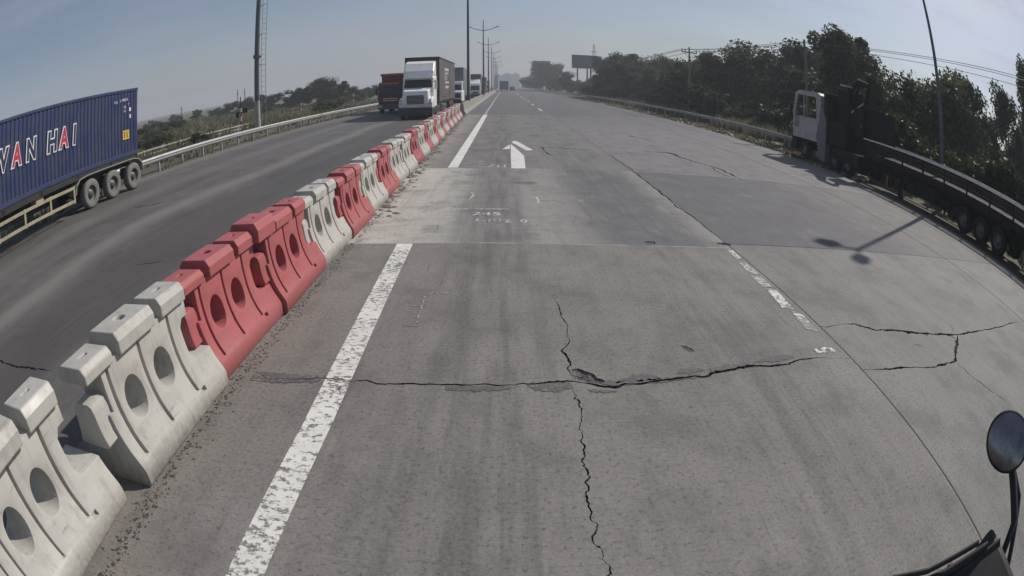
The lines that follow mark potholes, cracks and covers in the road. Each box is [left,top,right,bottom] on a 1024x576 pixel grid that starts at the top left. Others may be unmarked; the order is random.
crack [608,136,741,241]
crack [0,360,52,371]
crack [820,322,1017,400]
crack [250,295,846,576]
